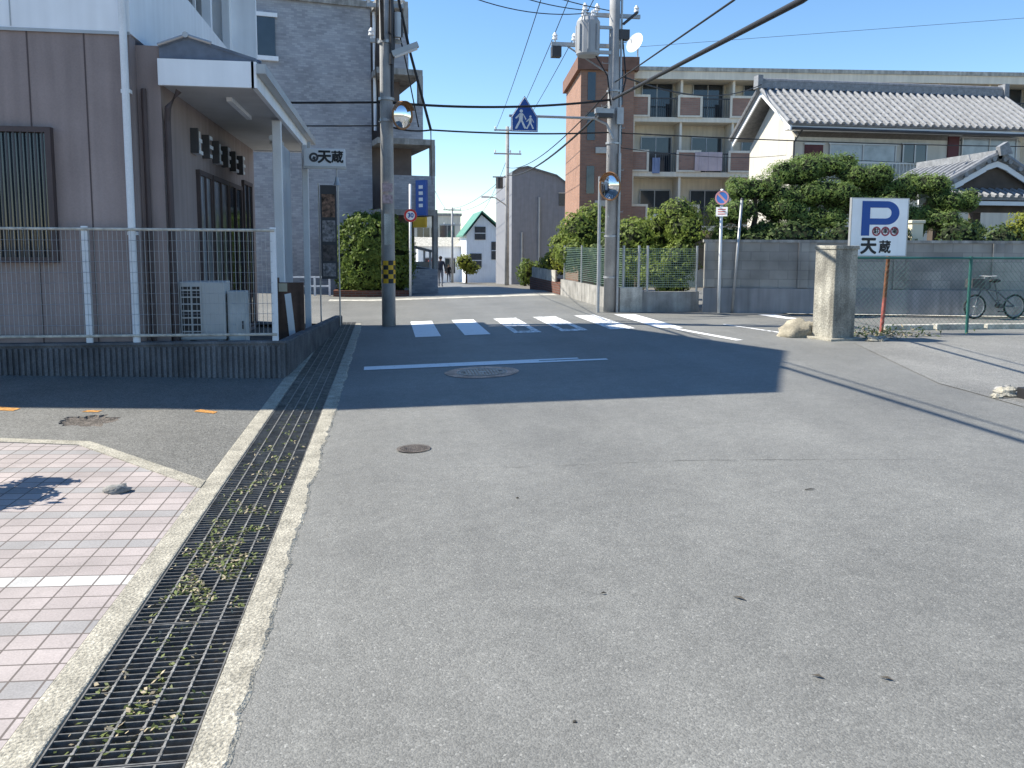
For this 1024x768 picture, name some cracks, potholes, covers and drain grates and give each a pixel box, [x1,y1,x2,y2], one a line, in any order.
drain grate [247,424,317,452]
drain grate [129,539,273,626]
drain grate [34,620,241,768]
drain grate [279,386,331,404]
manhole cover [397,444,431,452]
drain grate [222,451,307,489]
drain grate [291,373,337,387]
drain grate [265,403,325,425]
drain grate [299,362,341,374]
drain grate [185,487,293,543]
drain grate [307,353,344,363]
manhole cover [445,366,519,378]
